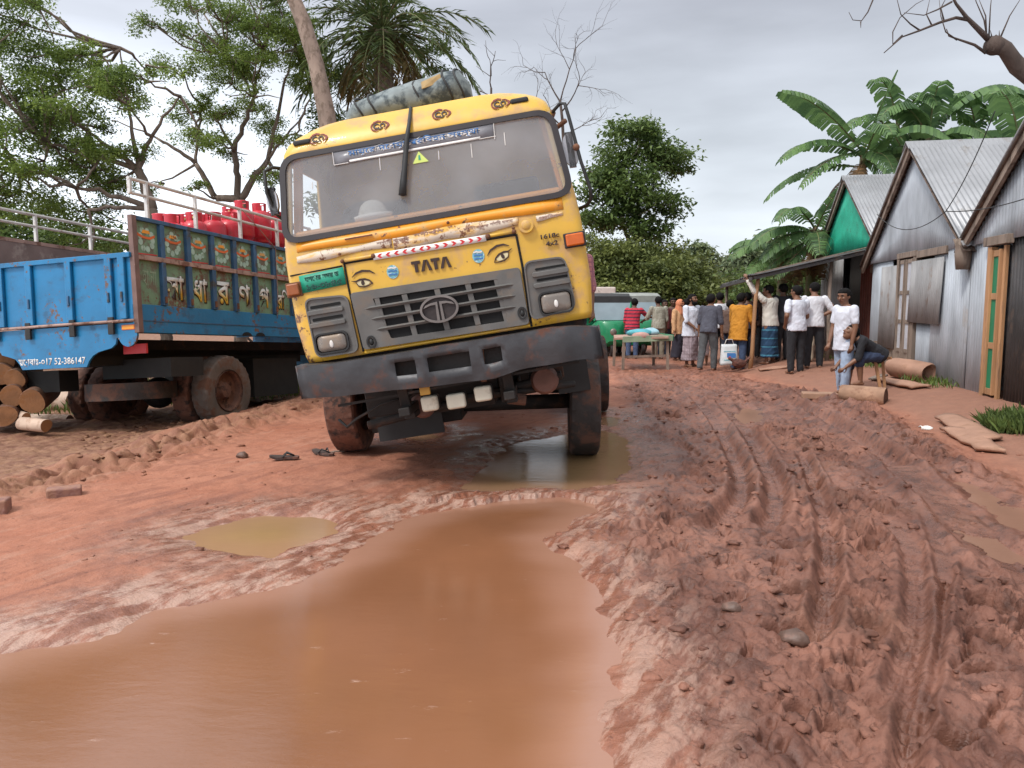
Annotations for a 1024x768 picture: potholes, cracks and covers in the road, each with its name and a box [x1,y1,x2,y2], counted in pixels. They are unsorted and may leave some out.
pothole [453,428,636,492]
pothole [0,490,641,768]
pothole [948,527,1024,568]
